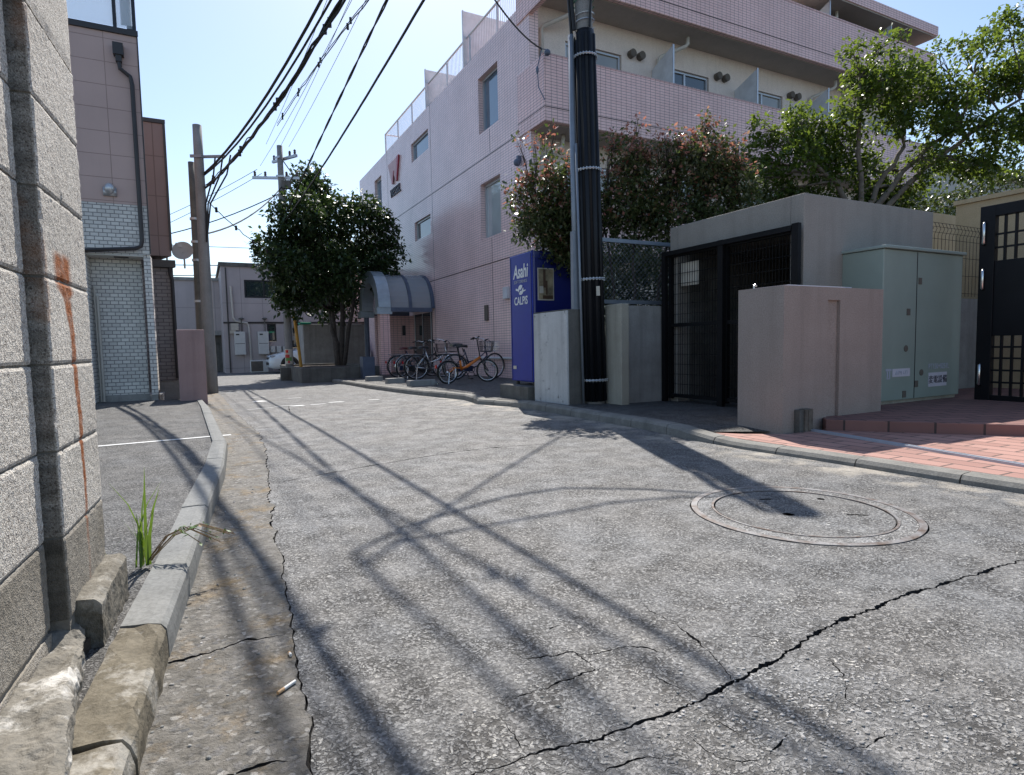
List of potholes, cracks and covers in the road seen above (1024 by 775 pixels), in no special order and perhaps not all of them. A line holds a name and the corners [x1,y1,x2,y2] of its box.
crack [472,560,1021,775]
crack [168,416,314,775]
manhole cover [691,486,928,547]
